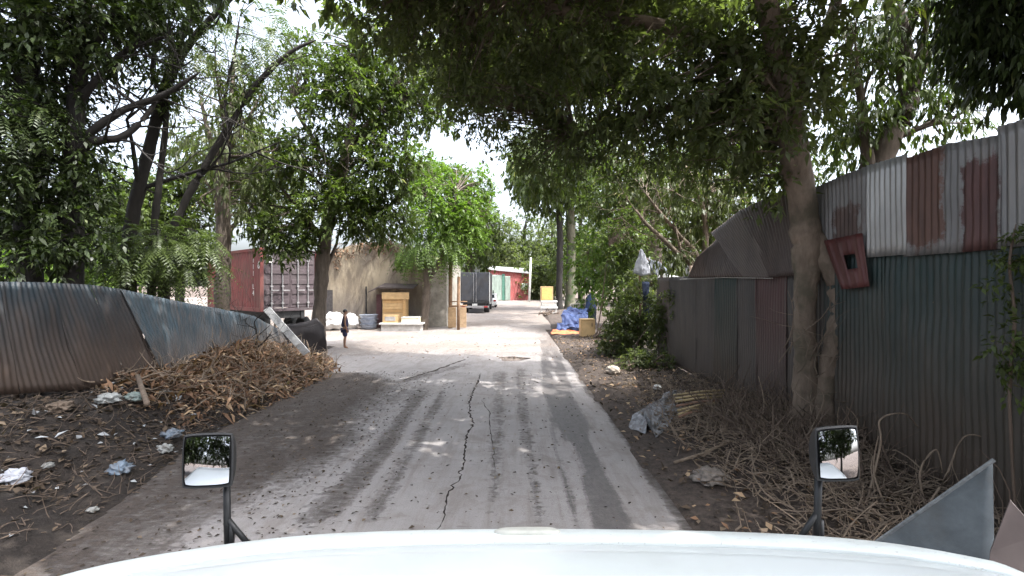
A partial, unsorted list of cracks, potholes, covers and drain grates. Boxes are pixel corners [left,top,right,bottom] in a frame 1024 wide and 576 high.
crack [439,375,495,528]
